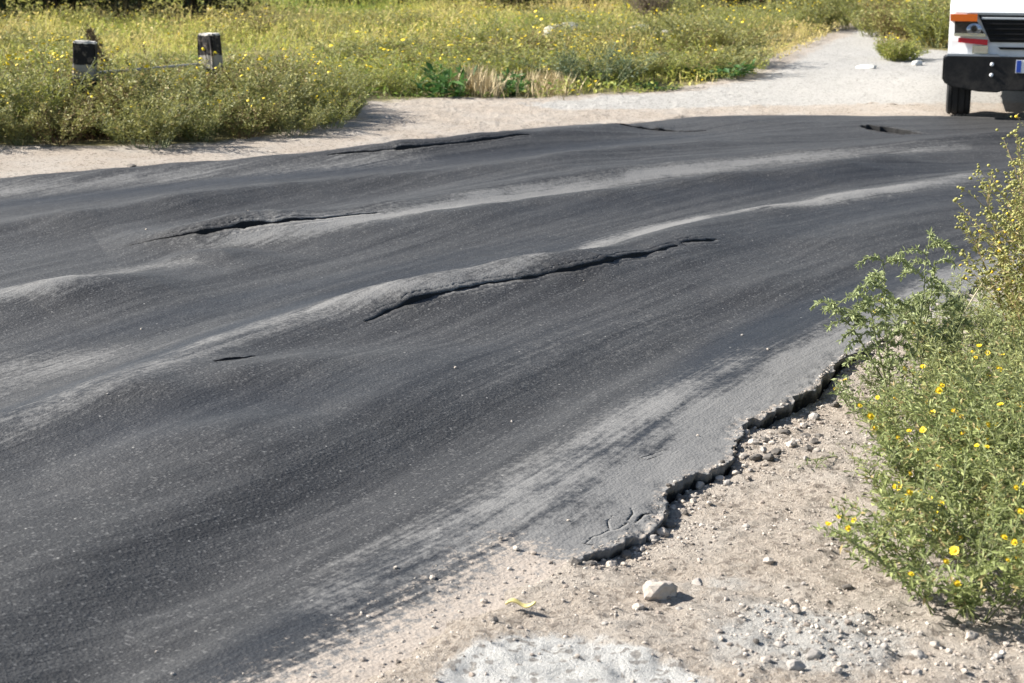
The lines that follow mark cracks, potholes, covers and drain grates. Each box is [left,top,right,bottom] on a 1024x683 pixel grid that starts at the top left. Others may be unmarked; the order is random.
crack [130,211,722,324]
crack [326,132,531,157]
crack [580,507,656,545]
crack [215,355,262,363]
crack [621,123,708,133]
